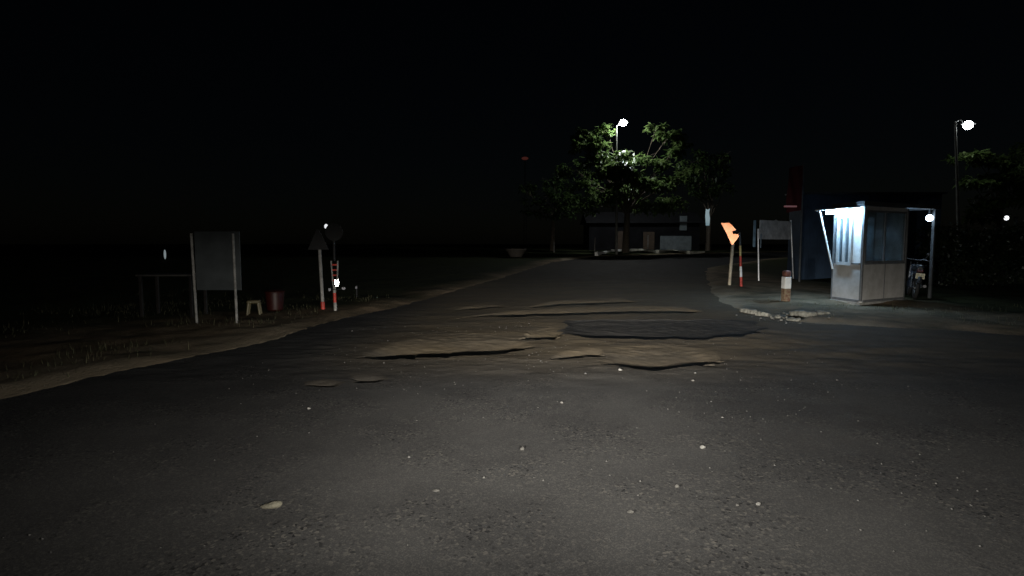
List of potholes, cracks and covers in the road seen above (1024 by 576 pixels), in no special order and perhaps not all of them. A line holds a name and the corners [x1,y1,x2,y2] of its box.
pothole [521,298,639,308]
pothole [597,343,725,371]
pothole [449,303,512,311]
pothole [452,305,704,319]
pothole [343,332,542,360]
pothole [544,346,607,360]
pothole [303,379,346,387]
pothole [348,373,389,383]
